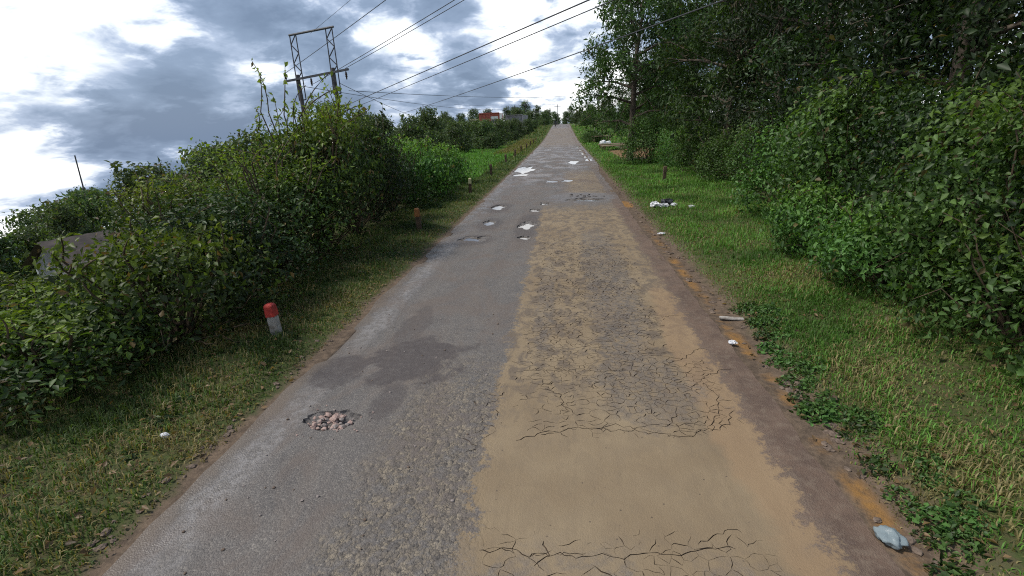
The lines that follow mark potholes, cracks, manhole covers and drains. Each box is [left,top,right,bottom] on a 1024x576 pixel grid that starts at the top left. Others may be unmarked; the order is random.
crack [512,236,741,441]
pothole [517,221,537,230]
pothole [302,410,363,432]
crack [482,528,775,576]
